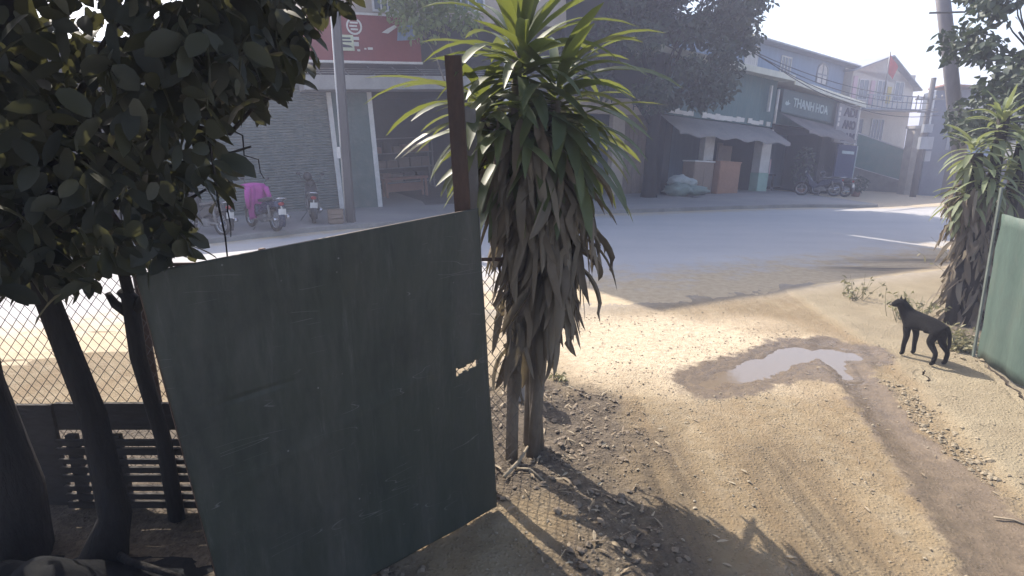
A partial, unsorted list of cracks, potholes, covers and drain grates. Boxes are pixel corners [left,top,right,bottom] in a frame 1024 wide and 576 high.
pothole [684,342,879,393]
